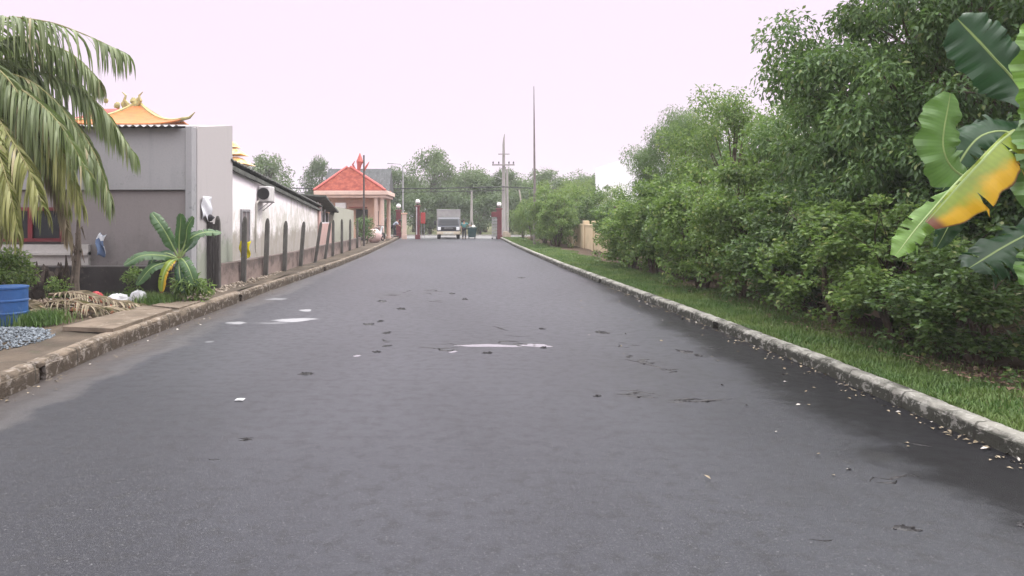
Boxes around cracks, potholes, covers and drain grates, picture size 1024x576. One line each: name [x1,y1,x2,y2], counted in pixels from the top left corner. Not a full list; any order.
pothole [892,524,923,532]
